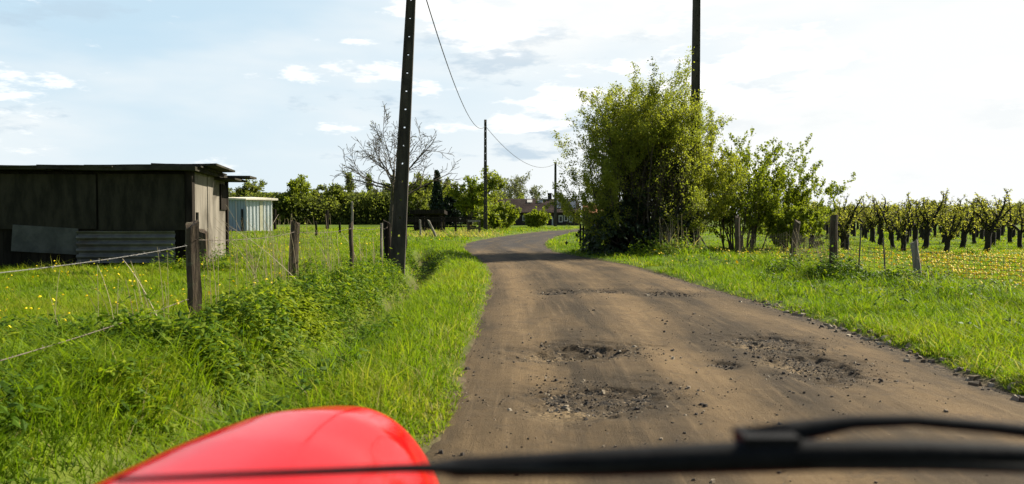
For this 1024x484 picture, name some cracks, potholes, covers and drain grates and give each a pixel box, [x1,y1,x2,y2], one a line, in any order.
pothole [517,386,687,423]
pothole [522,344,631,363]
pothole [714,335,817,354]
pothole [707,360,743,370]
pothole [759,355,869,385]
